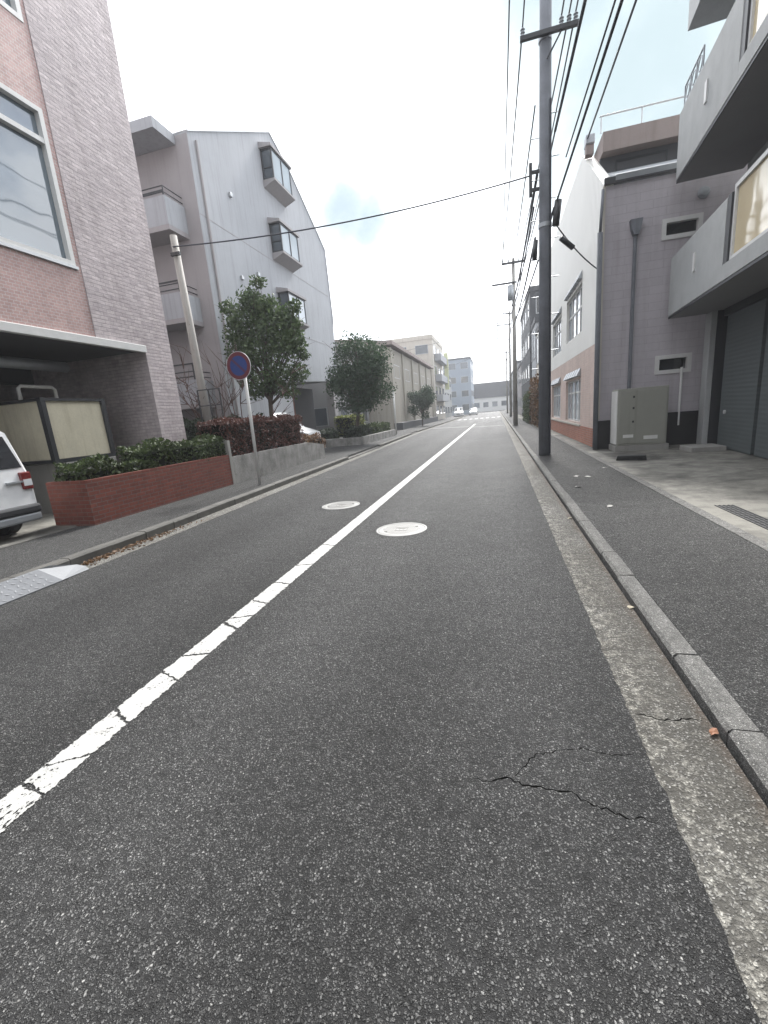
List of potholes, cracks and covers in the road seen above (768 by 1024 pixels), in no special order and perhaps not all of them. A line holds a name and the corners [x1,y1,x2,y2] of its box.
manhole cover [376,522,427,536]
crack [472,748,659,823]
crack [638,714,731,747]
manhole cover [322,501,360,510]
drain grate [714,504,768,530]
